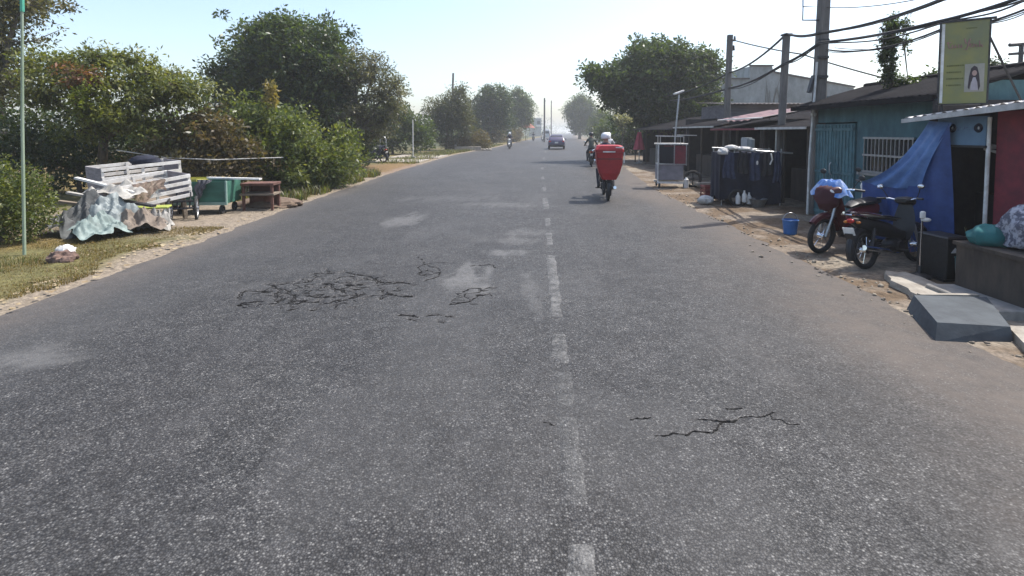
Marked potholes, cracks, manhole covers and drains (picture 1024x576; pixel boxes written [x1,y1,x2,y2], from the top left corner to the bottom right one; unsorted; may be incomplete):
crack [236,256,496,324]
crack [630,408,800,436]
